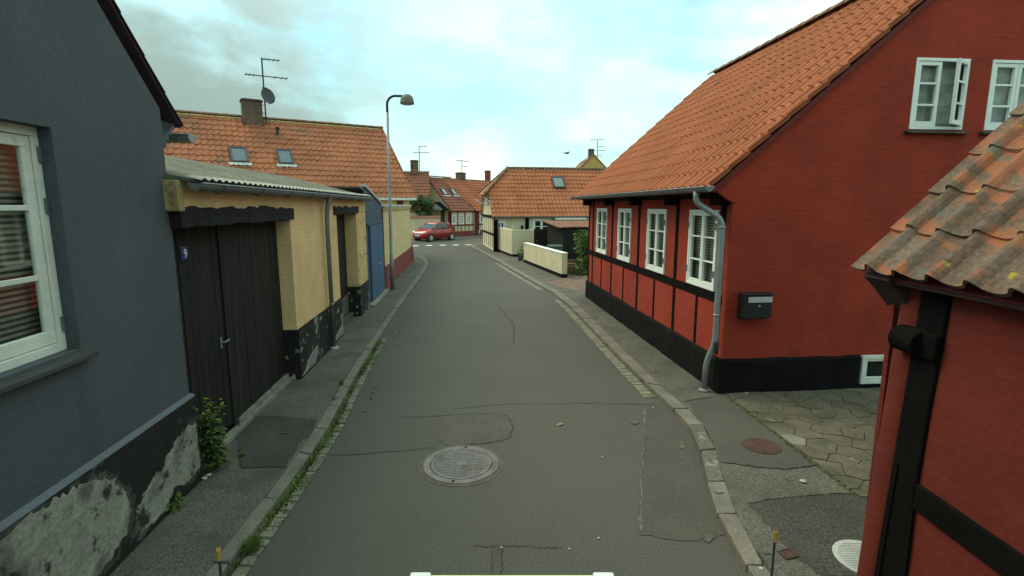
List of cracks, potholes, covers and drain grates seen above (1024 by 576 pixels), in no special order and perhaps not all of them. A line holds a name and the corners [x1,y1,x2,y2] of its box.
manhole cover [742,438,782,455]
manhole cover [419,445,503,487]
crack [327,447,437,455]
utility cover [777,548,799,560]
crack [473,544,557,574]
